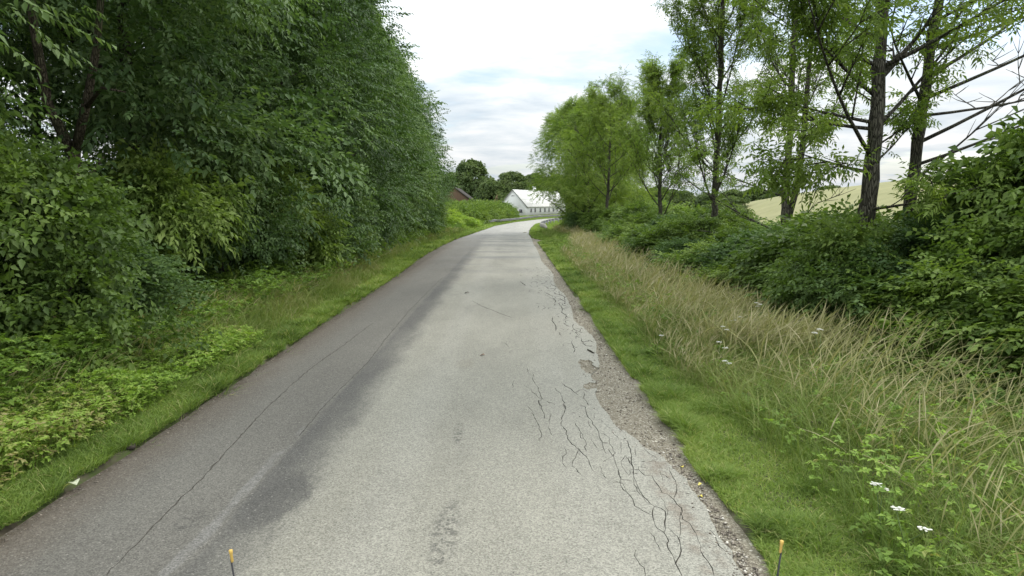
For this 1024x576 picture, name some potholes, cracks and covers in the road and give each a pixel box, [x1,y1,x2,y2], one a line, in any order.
crack [505,343,725,576]
crack [520,269,592,353]
